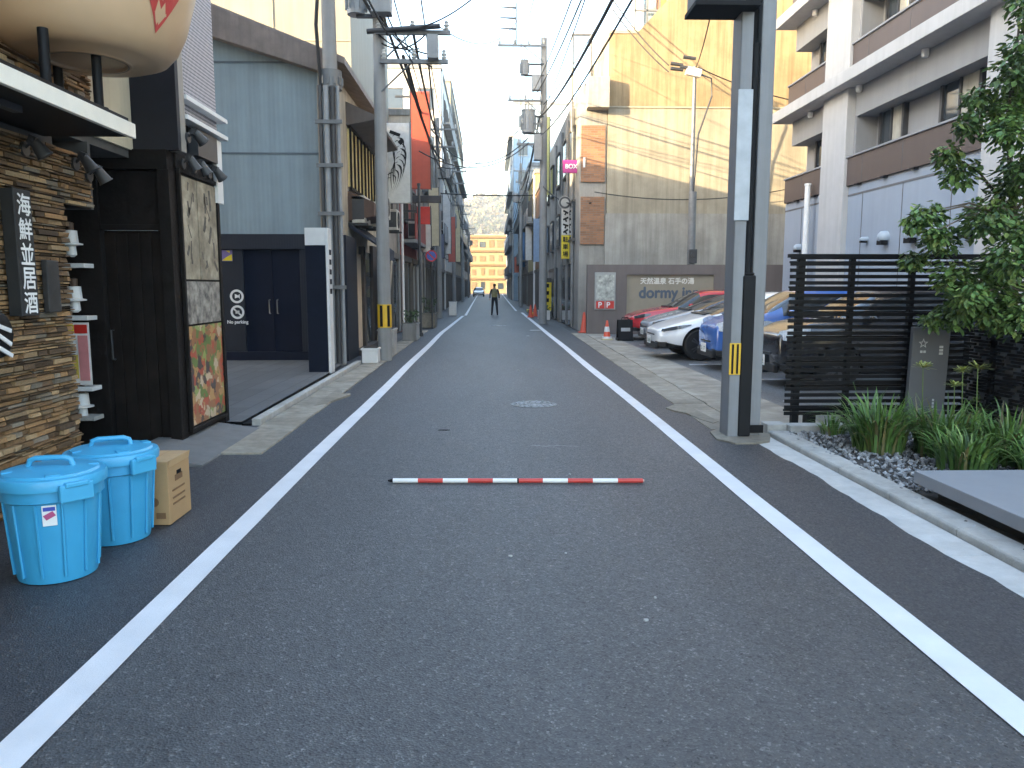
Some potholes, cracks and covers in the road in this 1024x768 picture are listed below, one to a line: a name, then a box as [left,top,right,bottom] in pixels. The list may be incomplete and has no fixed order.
manhole cover [511,400,557,408]
